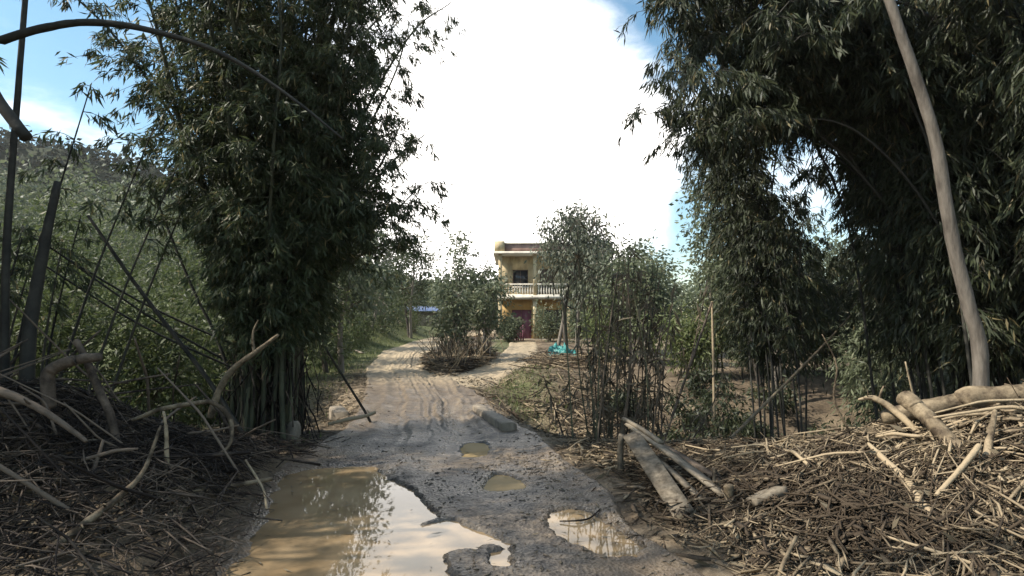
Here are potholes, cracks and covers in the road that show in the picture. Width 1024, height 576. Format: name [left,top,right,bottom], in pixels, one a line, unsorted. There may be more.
pothole [458,440,494,458]
pothole [206,461,519,576]
pothole [480,471,530,491]
pothole [543,505,655,557]
